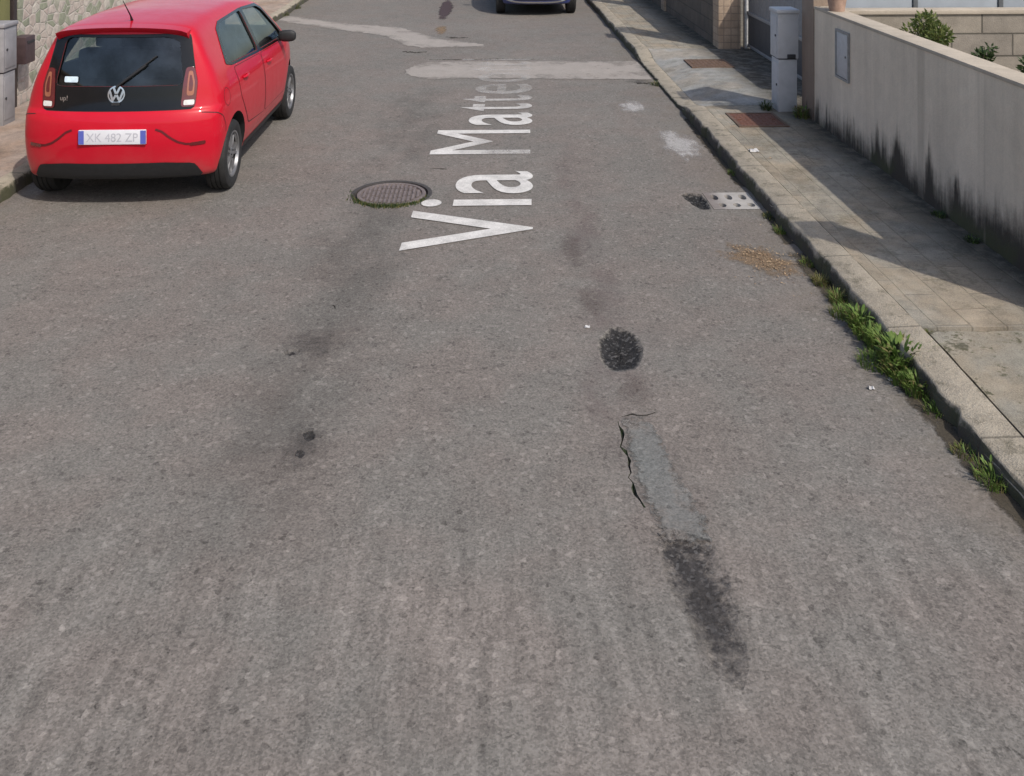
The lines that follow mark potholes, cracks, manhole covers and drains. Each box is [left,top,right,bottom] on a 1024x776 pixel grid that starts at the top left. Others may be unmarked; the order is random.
drain grate [703,192,761,210]
manhole cover [350,180,432,207]
pothole [681,193,711,210]
crack [618,412,655,508]
manhole cover [725,112,790,128]
pothole [301,430,316,442]
manhole cover [684,59,735,68]
pothole [598,327,643,372]
